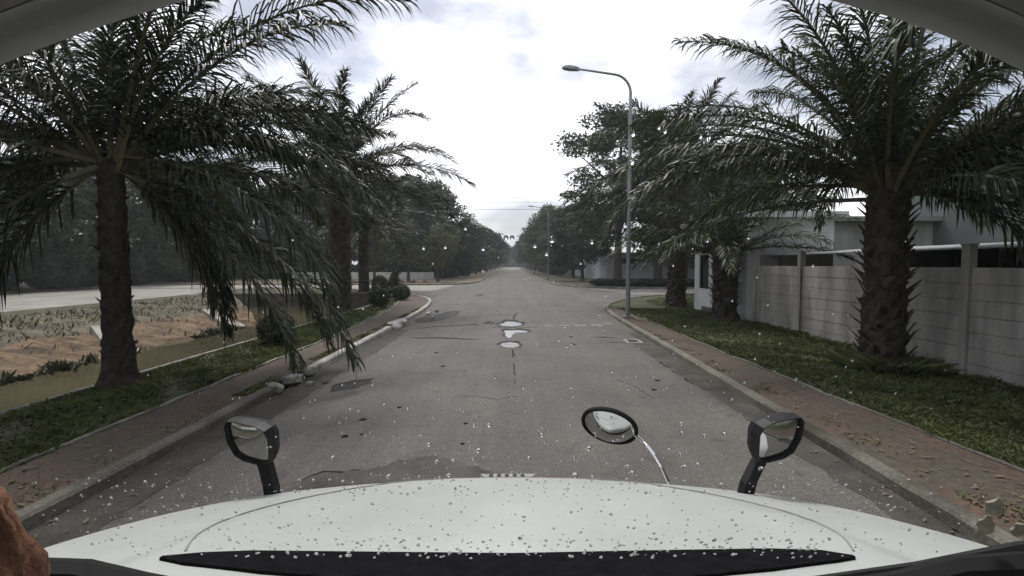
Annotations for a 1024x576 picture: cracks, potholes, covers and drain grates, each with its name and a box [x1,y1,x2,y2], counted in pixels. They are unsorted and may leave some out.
pothole [501,328,532,338]
